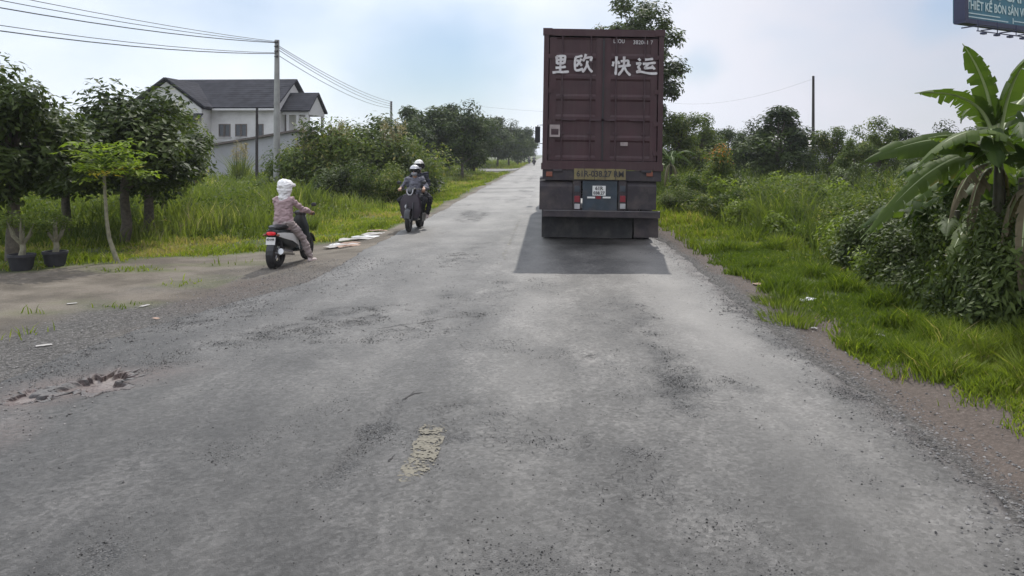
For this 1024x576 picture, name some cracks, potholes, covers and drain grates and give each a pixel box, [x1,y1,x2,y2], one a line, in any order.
pothole [0,386,57,407]
pothole [29,367,147,400]
